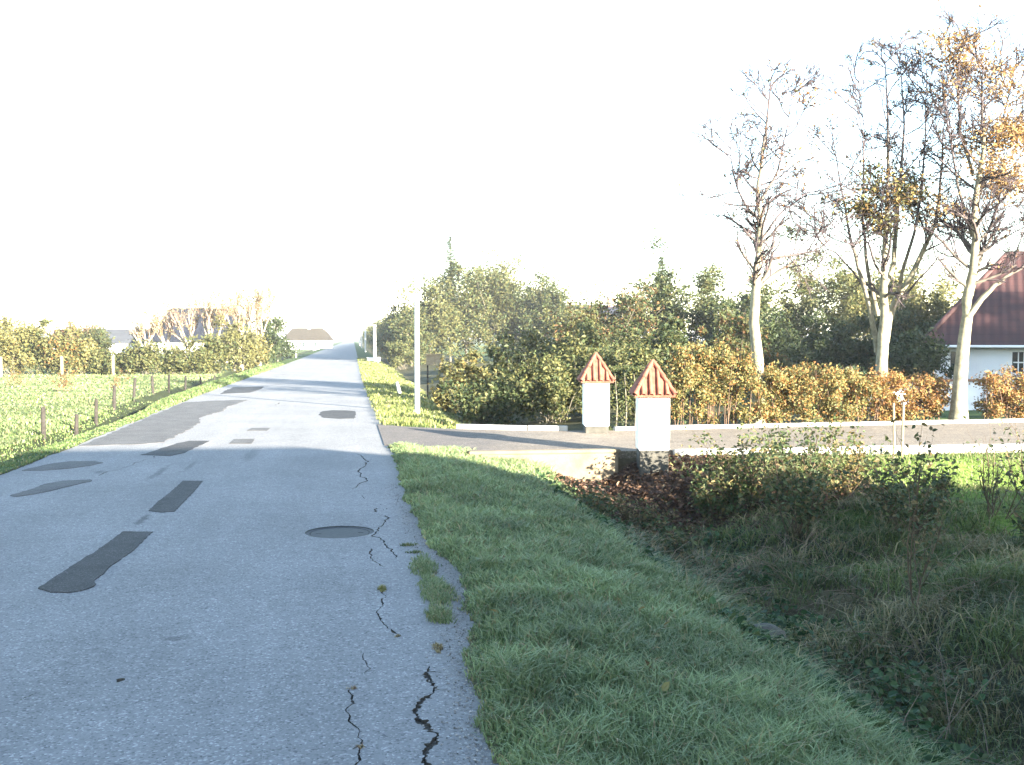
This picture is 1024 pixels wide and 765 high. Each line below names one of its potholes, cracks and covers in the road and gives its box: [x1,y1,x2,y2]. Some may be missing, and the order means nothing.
crack [345,653,371,765]
crack [376,592,401,636]
manhole cover [305,526,374,538]
crack [412,666,440,765]
crack [355,455,397,566]
